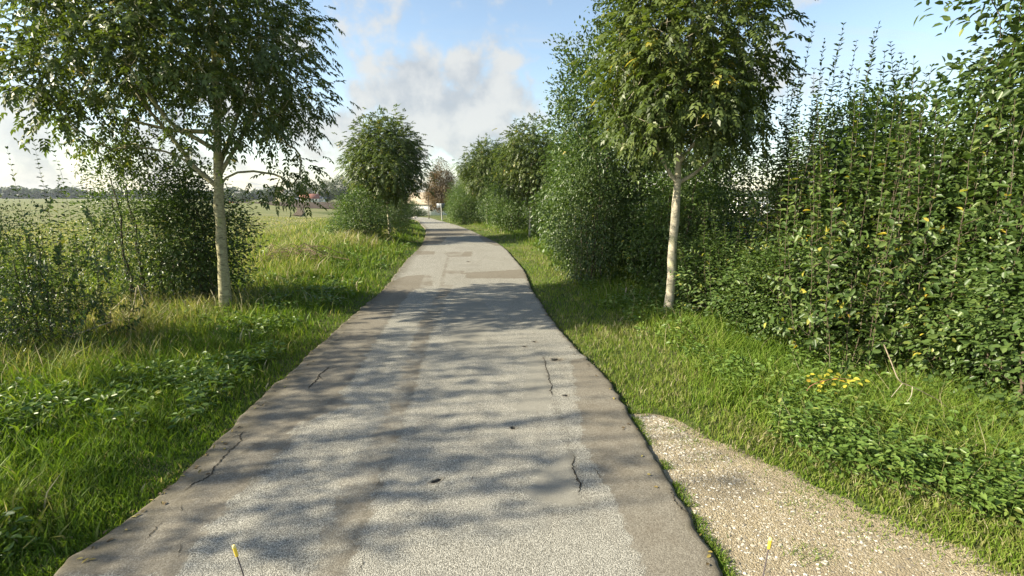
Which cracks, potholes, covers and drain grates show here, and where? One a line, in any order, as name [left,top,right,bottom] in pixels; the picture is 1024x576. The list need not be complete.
crack [181,431,244,509]
